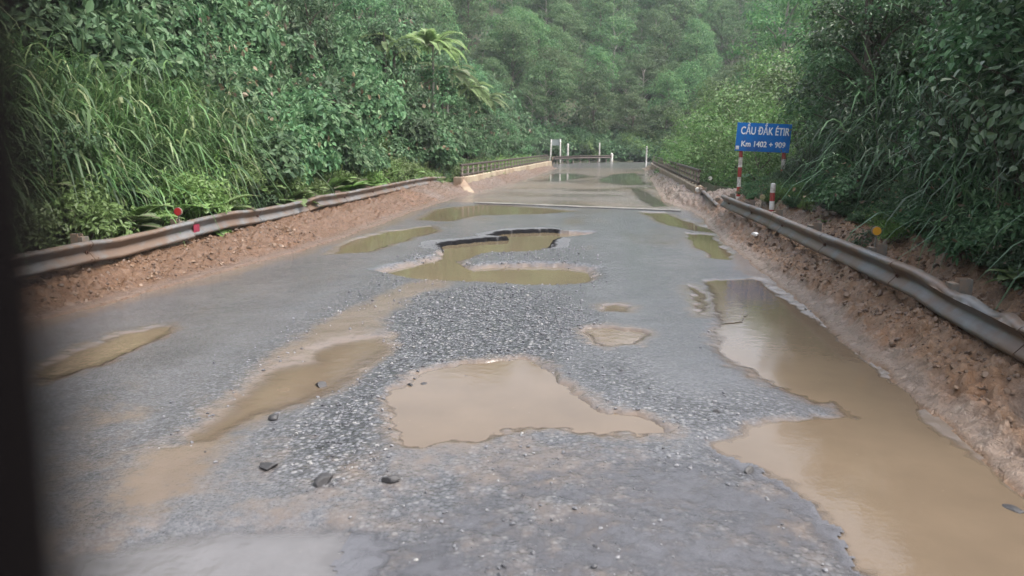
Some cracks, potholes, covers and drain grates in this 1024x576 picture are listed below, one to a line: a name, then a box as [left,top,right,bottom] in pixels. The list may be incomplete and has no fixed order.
pothole [683,232,736,260]
pothole [692,278,919,414]
pothole [379,229,600,285]
pothole [78,324,178,371]
pothole [576,324,655,347]
pothole [597,302,638,313]
pothole [380,355,677,449]
pothole [711,405,1024,576]
